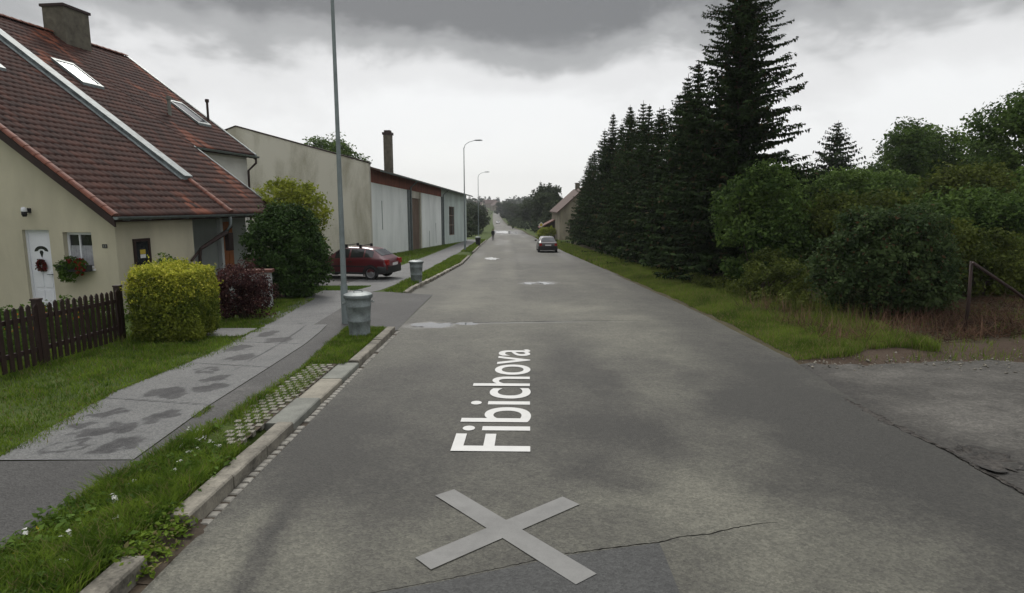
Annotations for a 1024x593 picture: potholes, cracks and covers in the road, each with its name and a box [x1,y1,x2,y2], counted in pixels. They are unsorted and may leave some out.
crack [842,397,1024,494]
crack [372,522,775,593]
